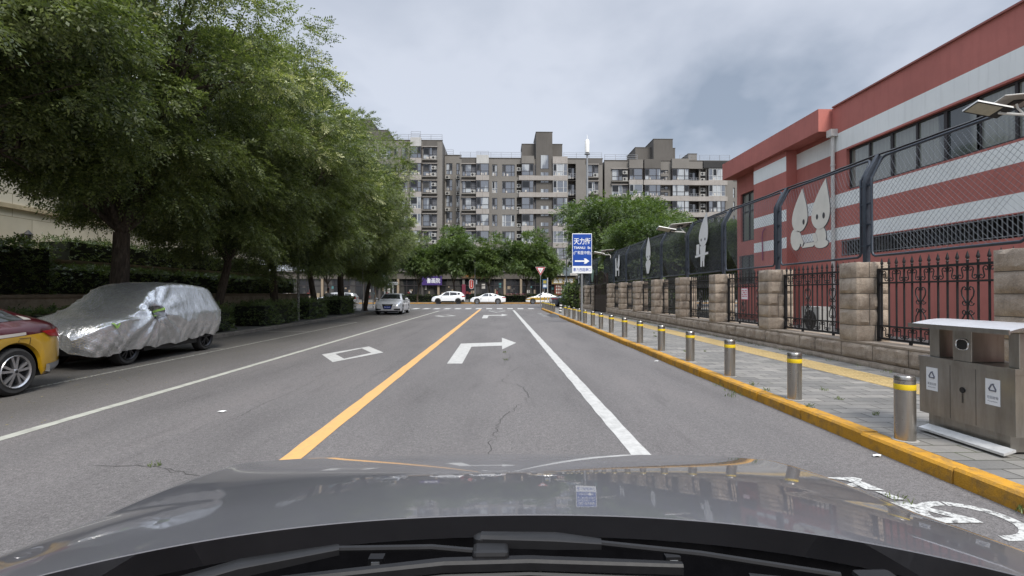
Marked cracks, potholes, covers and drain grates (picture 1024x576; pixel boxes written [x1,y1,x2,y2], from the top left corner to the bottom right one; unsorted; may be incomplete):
crack [488,332,529,454]
